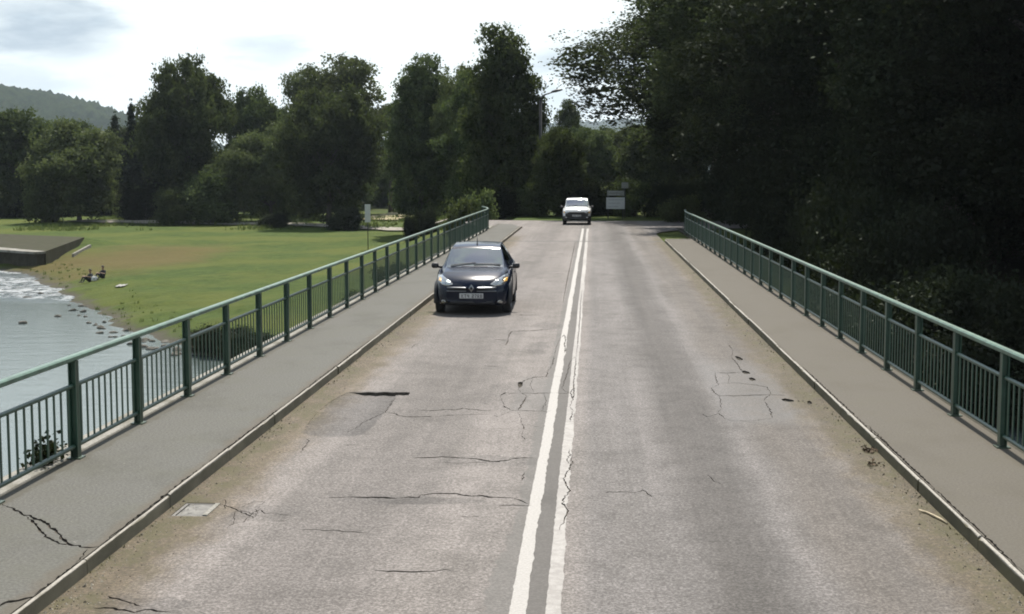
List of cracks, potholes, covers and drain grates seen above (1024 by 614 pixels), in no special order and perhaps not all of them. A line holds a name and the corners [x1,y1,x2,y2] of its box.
crack [96,596,165,613]
crack [348,244,582,440]
crack [703,346,773,421]
manhole cover [171,503,220,516]
crack [332,456,526,506]
crack [2,504,100,563]
crack [222,500,281,527]
crack [559,454,573,530]
